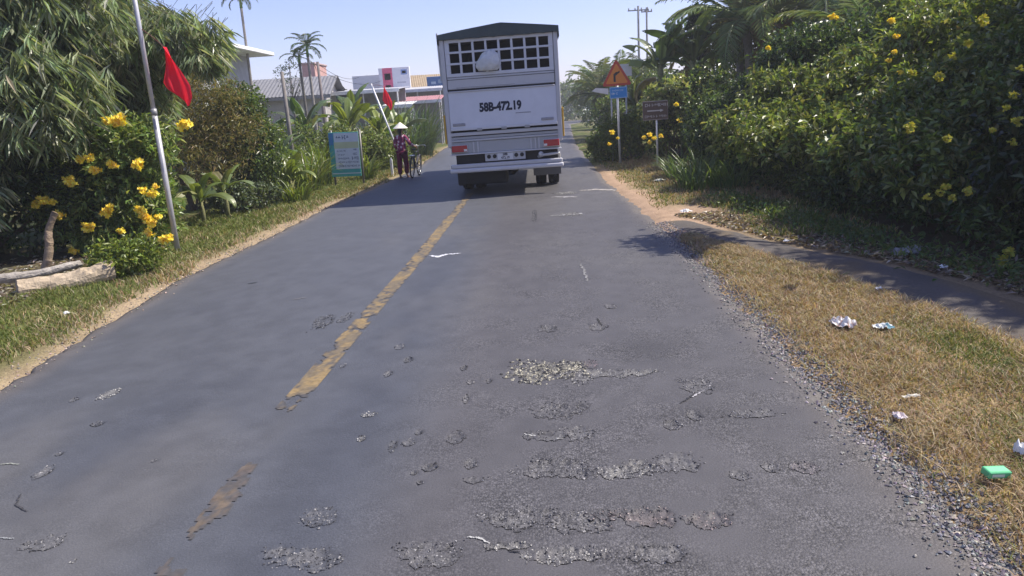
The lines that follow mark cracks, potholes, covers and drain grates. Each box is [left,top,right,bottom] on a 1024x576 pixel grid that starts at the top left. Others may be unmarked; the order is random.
pothole [31,464,55,480]
pothole [583,359,598,369]
pothole [310,314,336,330]
pothole [391,540,465,570]
pothole [623,543,688,566]
pothole [528,400,591,420]
pothole [587,505,743,530]
pothole [298,506,337,529]
pothole [522,425,594,443]
pothole [17,533,67,552]
pothole [675,376,715,394]
pothole [590,458,664,481]
